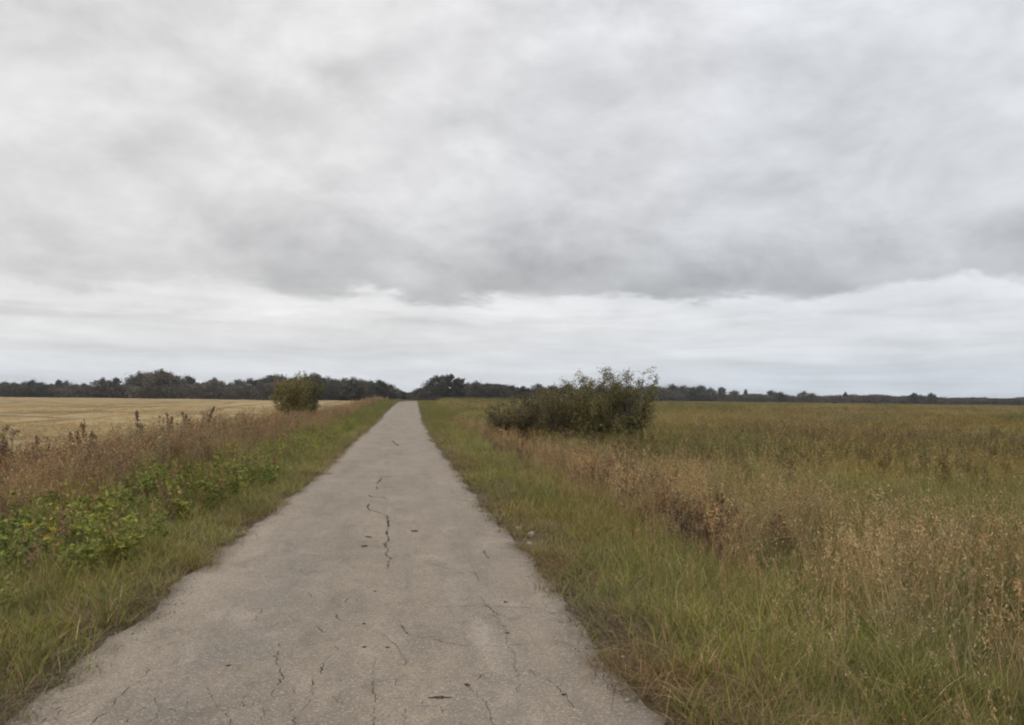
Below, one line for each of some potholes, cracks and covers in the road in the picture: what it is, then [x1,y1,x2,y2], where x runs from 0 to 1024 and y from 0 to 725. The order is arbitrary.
crack [42,597,350,725]
crack [367,476,433,568]
crack [442,550,574,707]
